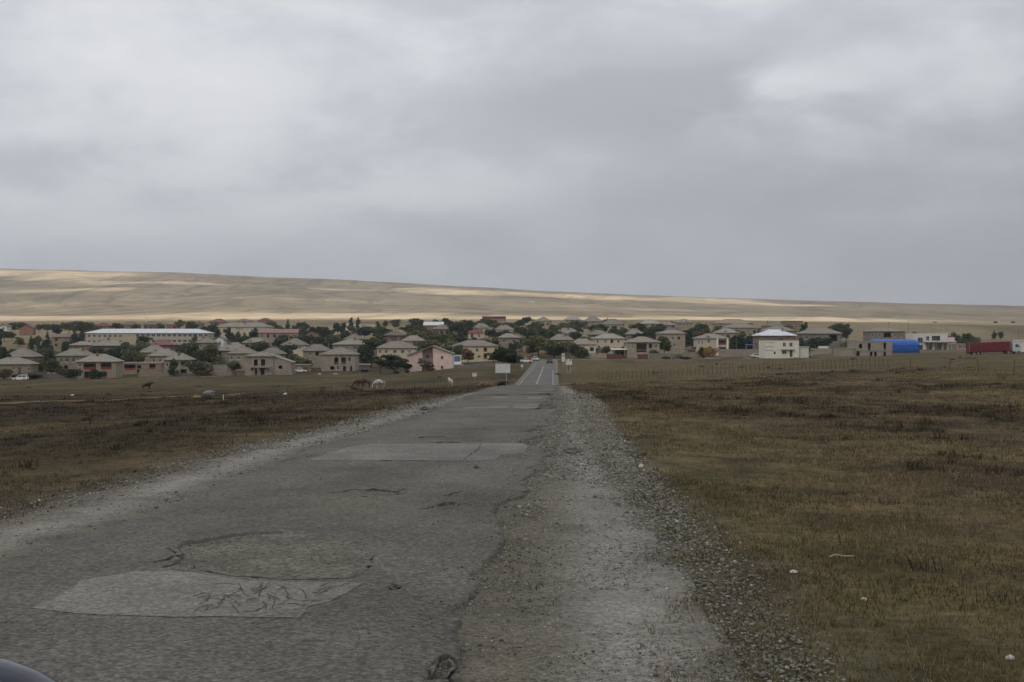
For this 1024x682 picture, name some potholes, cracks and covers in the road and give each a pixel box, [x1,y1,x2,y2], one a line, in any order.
crack [194,582,350,614]
pothole [424,653,456,682]
